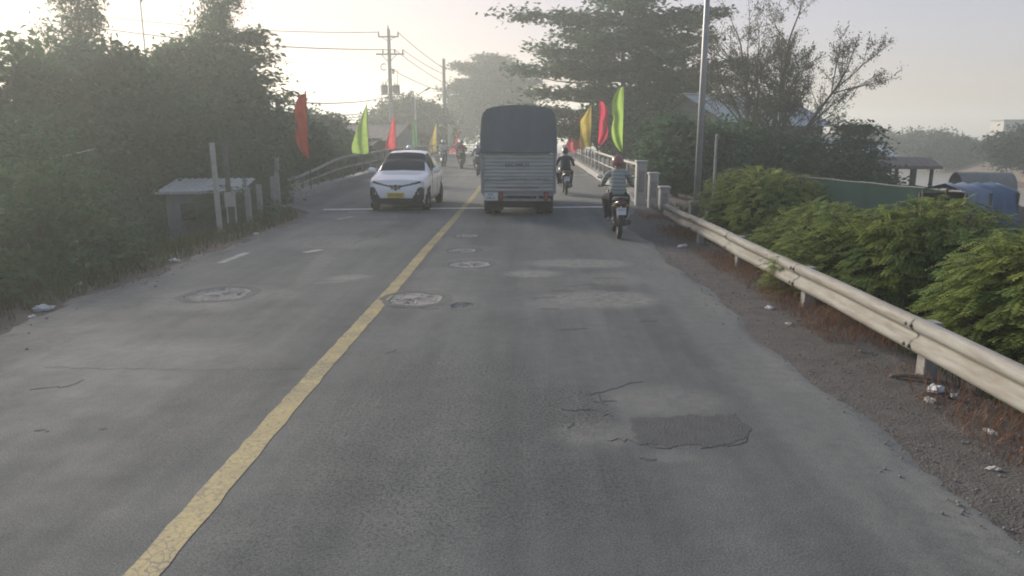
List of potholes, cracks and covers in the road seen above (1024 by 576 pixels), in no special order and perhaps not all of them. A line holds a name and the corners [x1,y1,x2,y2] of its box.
crack [550,381,747,461]
crack [30,379,84,390]
